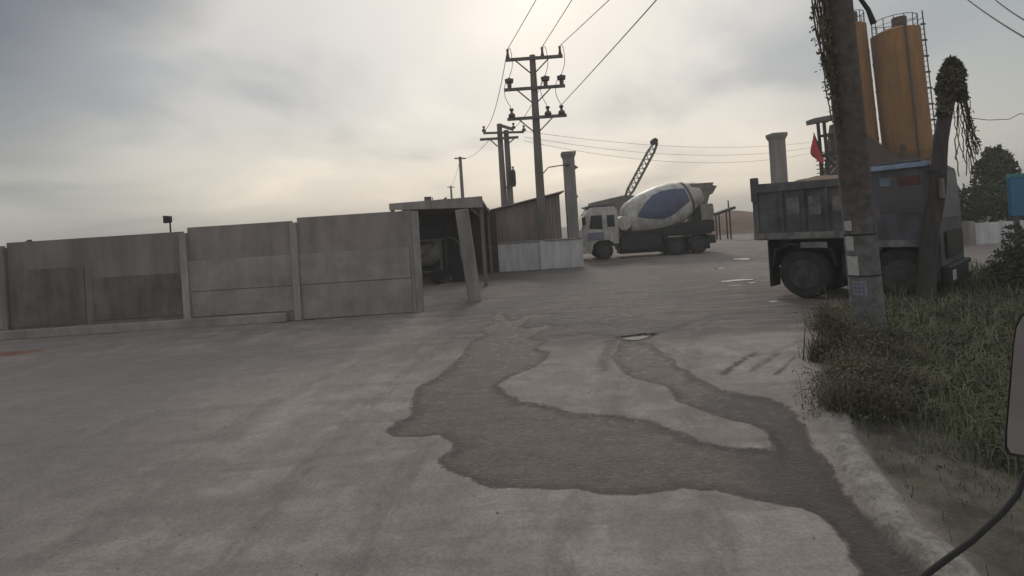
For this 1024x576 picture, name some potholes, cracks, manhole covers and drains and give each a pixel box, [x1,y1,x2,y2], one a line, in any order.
pothole [613,332,660,341]
